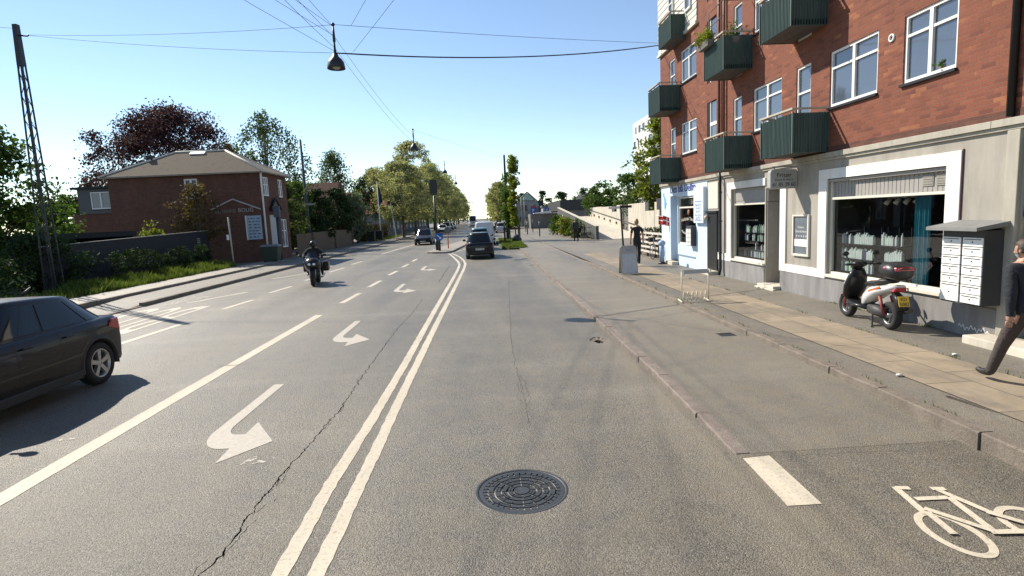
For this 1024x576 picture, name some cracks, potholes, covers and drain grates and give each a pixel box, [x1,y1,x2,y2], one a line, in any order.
crack [193,305,418,576]
manhole cover [475,469,569,514]
crack [508,295,531,422]
